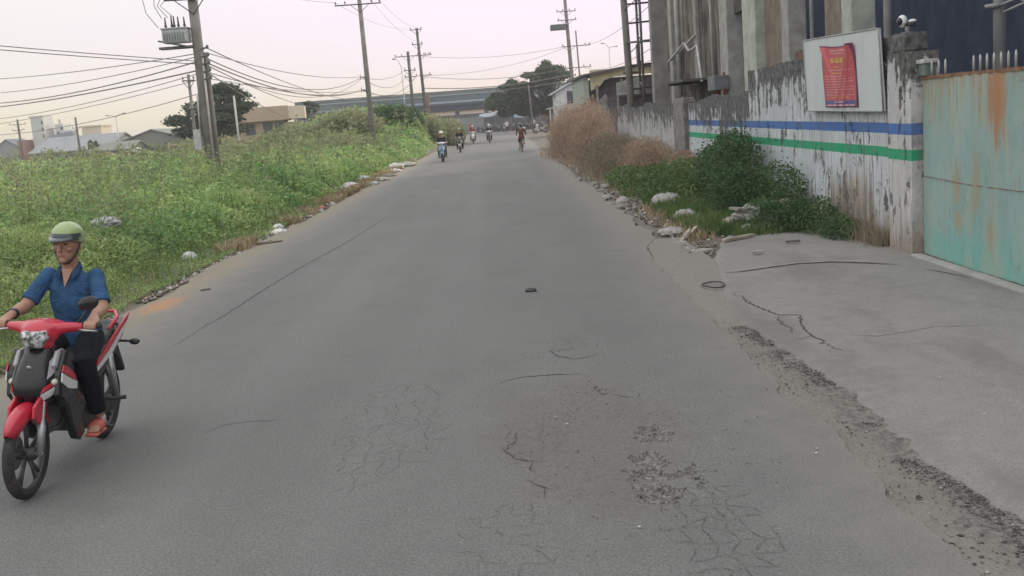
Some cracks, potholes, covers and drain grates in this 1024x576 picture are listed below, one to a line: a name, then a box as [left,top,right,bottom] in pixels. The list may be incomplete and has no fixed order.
crack [657,479,784,576]
pothole [632,421,681,444]
crack [501,338,598,383]
pothole [621,448,710,506]
crack [329,384,452,494]
crack [457,423,562,574]
crack [734,292,969,351]
